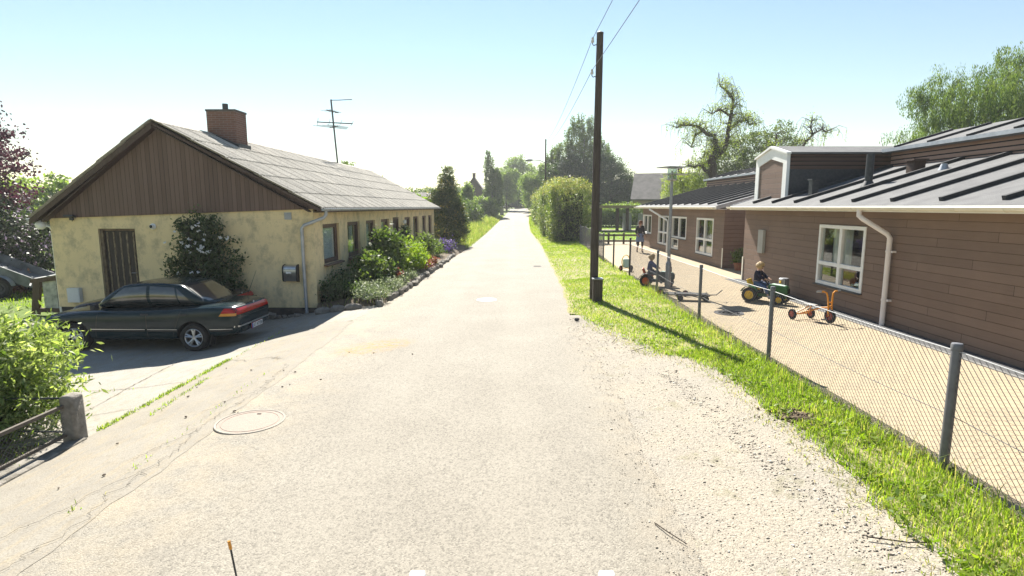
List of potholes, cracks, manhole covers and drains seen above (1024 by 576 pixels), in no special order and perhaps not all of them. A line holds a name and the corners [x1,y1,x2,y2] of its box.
manhole cover [213,409,286,435]
crack [1,357,286,571]
